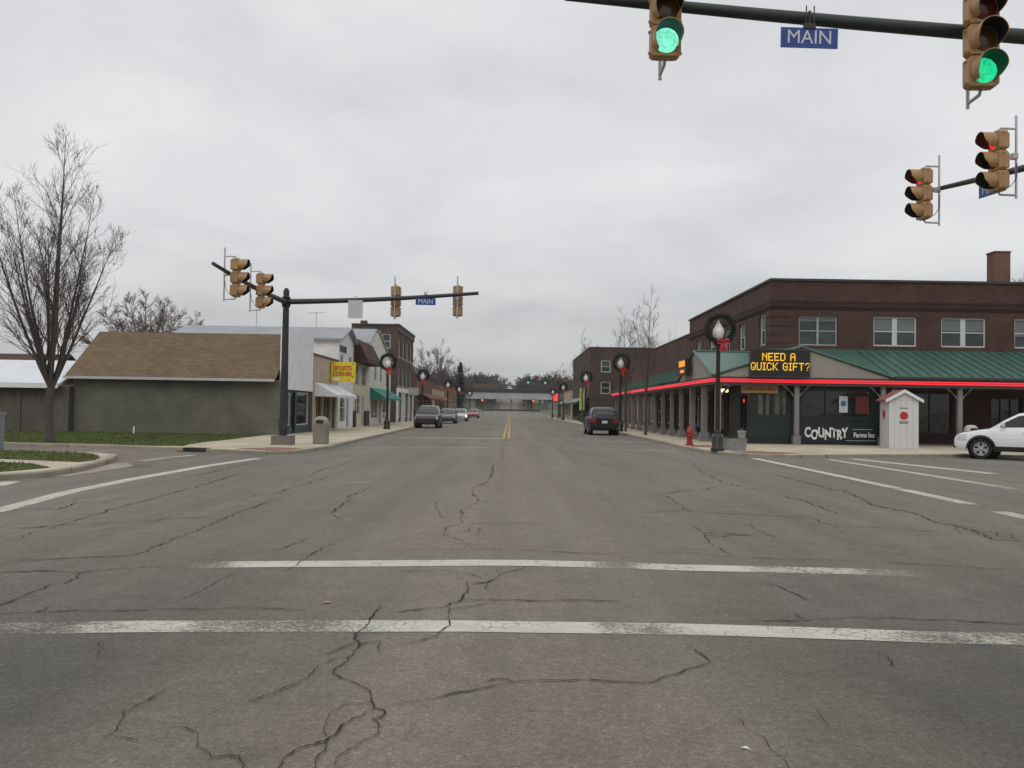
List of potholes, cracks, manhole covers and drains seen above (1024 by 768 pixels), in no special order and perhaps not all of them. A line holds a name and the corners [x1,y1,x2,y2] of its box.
crack [104,688,166,742]
crack [2,460,355,613]
crack [250,604,710,768]
crack [182,726,245,768]
crack [741,580,1018,624]
crack [425,455,1022,570]
